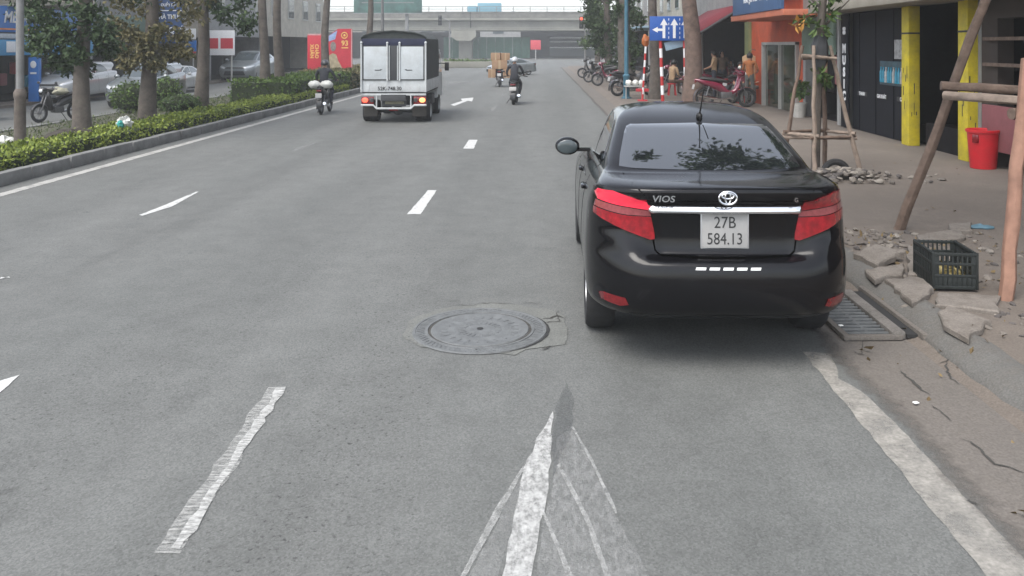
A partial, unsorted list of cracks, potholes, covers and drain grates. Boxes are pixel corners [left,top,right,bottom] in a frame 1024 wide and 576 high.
drain grate [844,286,928,341]
manhole cover [403,301,567,355]
drain grate [826,296,903,341]
crack [900,359,959,421]
crack [963,439,1024,473]
